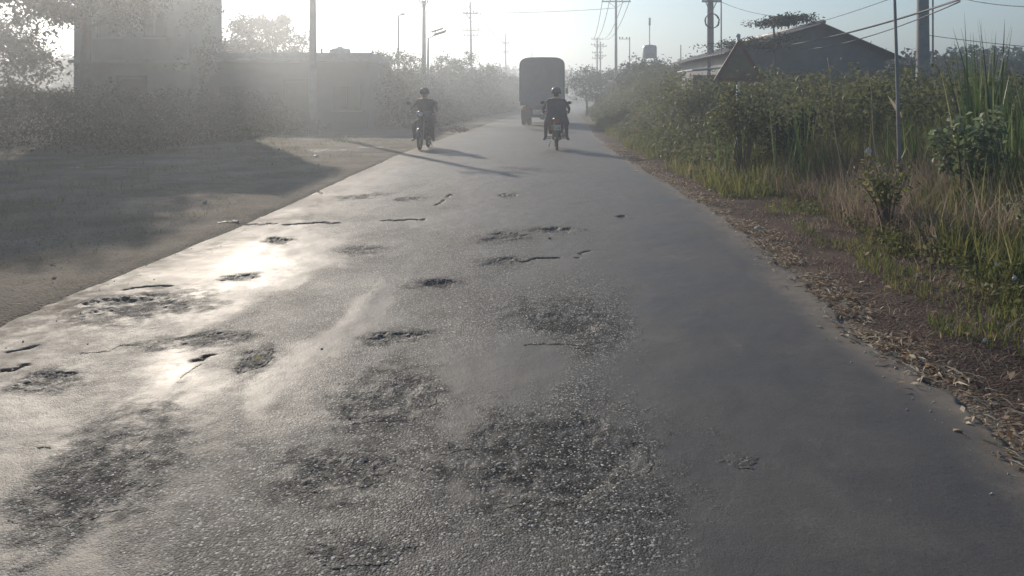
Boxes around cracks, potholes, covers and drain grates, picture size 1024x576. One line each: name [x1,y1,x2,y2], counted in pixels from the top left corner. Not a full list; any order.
pothole [367,331,433,344]
pothole [154,331,253,349]
pothole [417,278,458,288]
pothole [10,370,79,392]
pothole [481,256,527,266]
pothole [222,273,257,281]
pothole [719,453,758,469]
pothole [529,226,586,234]
pothole [71,290,193,323]
pothole [236,347,273,374]
pothole [480,231,532,242]
